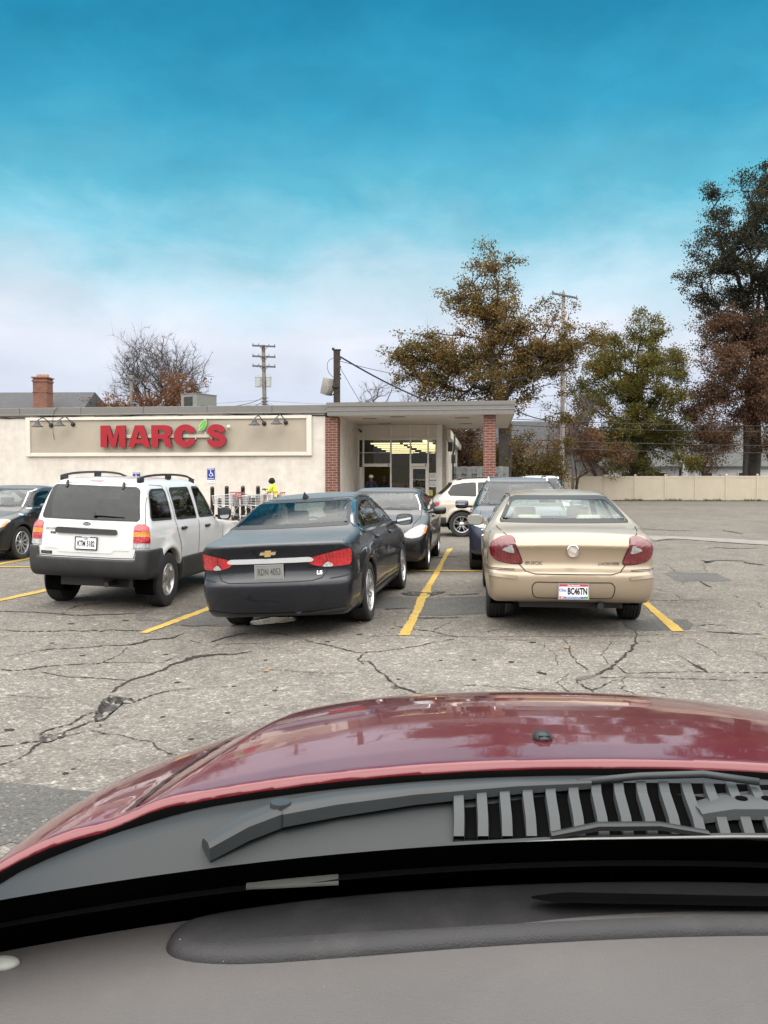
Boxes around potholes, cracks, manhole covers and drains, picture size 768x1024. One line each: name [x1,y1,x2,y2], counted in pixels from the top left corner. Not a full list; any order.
crack [0,603,507,765]
crack [484,624,768,695]
crack [664,530,763,601]
pothole [94,694,136,722]
